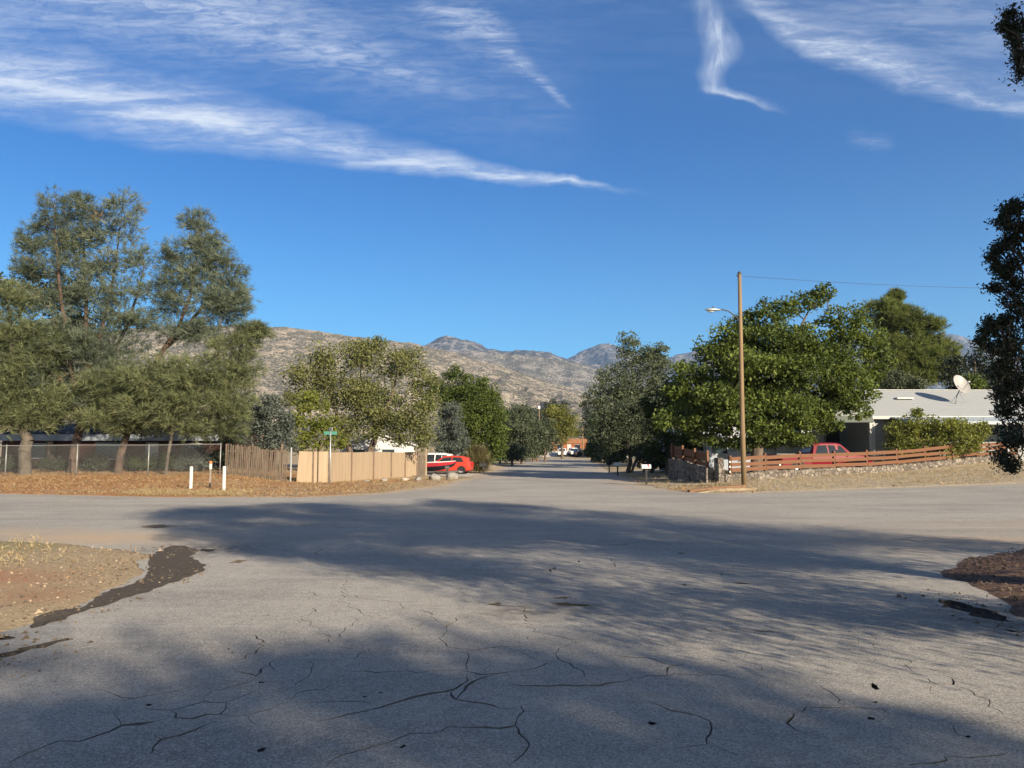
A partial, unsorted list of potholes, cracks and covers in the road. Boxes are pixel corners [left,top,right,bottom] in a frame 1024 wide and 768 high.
crack [909,753,1008,765]
crack [852,635,1016,736]
pothole [939,600,1011,622]
crack [786,687,889,734]
crack [4,578,738,765]
